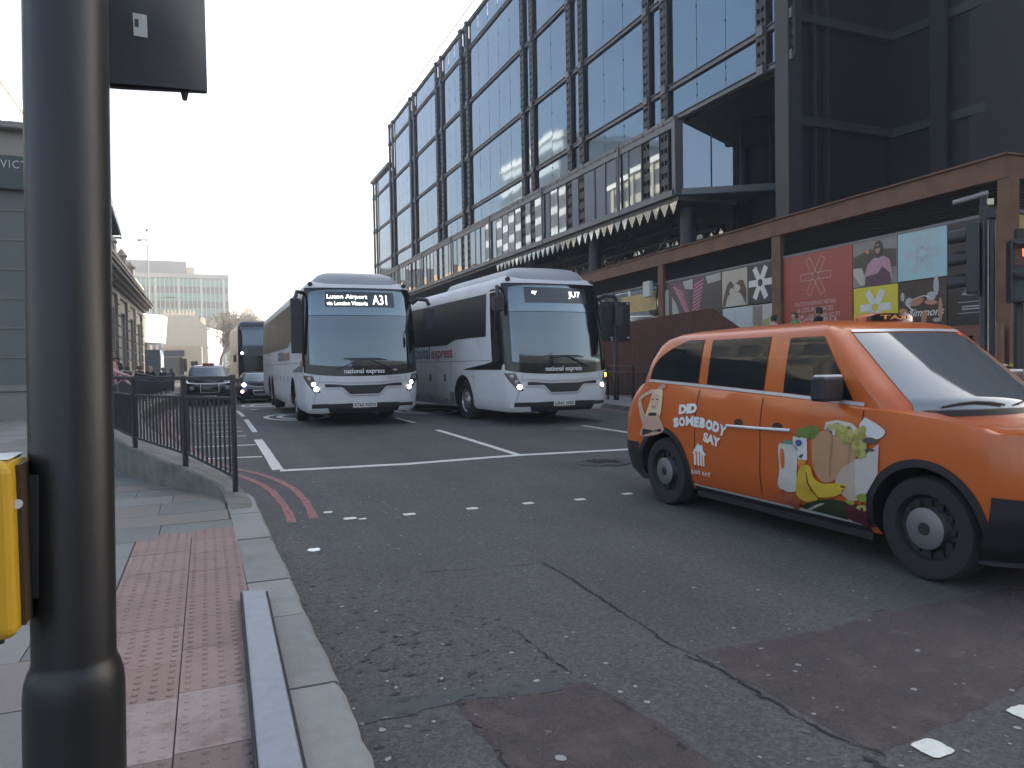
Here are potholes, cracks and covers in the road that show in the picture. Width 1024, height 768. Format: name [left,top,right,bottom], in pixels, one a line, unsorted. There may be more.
crack [425,562,889,768]
